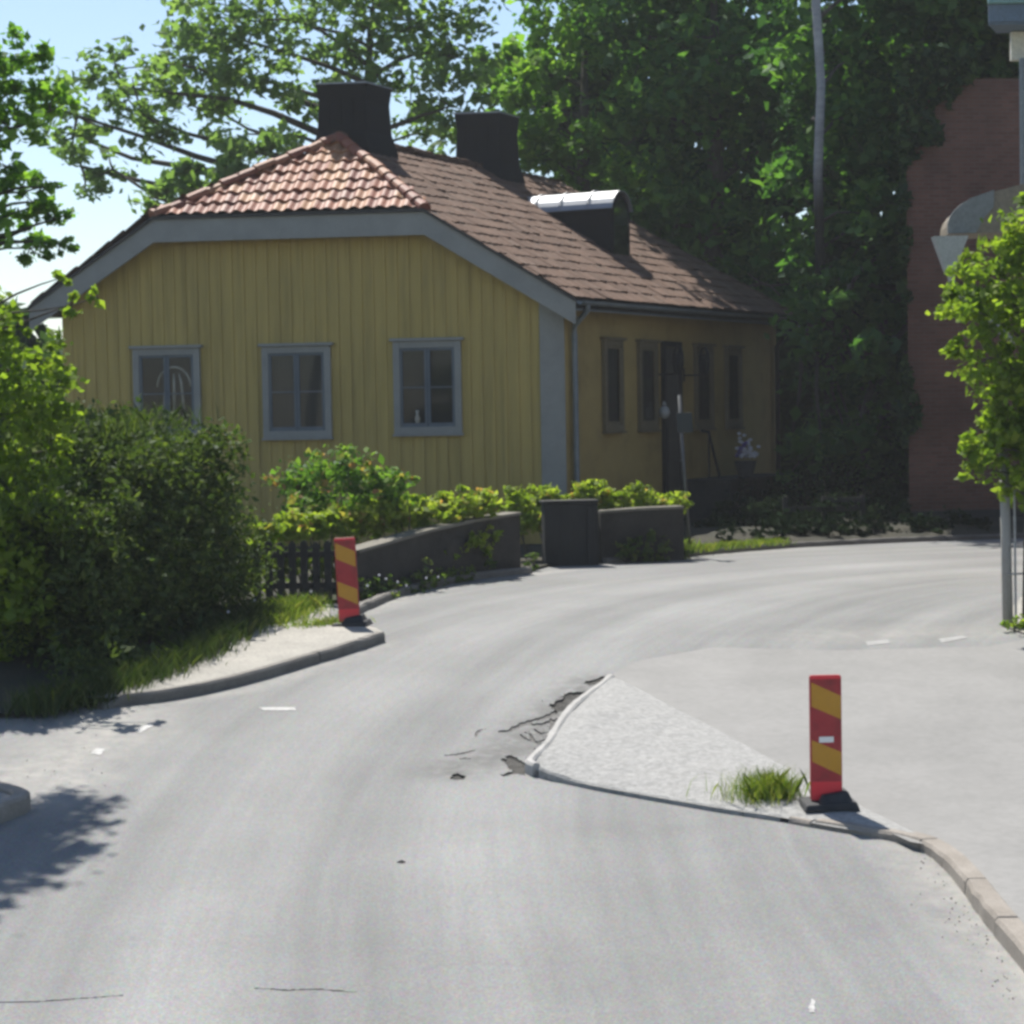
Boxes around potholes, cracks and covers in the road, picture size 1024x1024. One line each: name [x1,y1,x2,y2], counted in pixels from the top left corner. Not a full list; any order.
crack [0,995,123,1003]
crack [444,710,558,759]
pothole [500,755,525,777]
